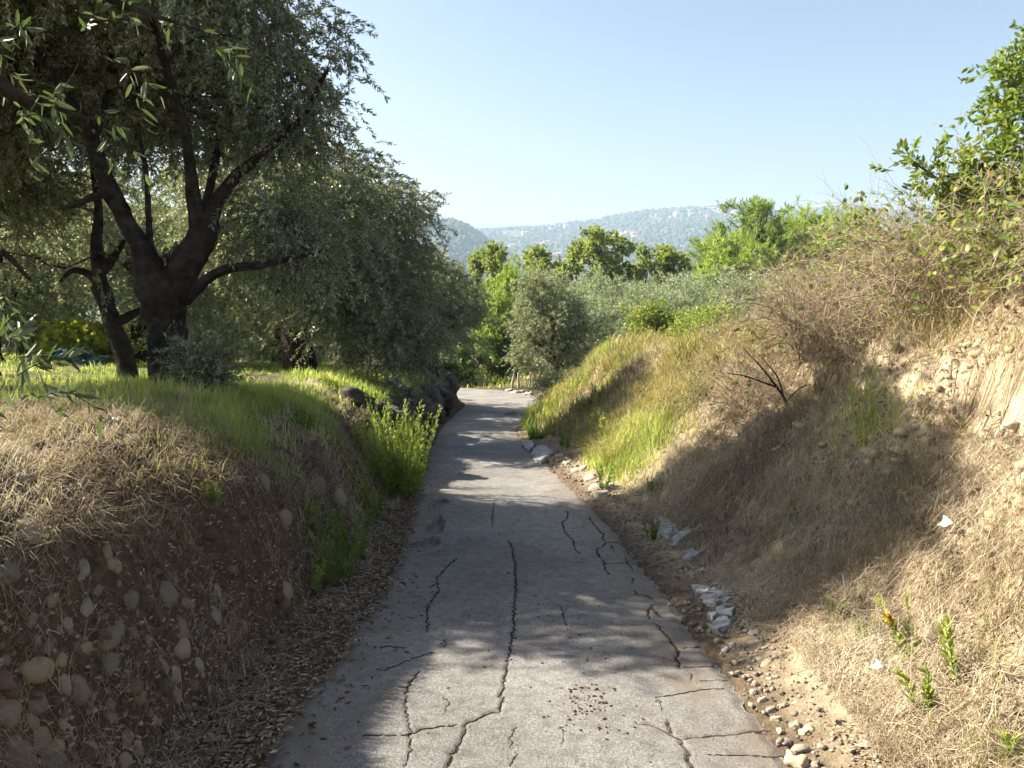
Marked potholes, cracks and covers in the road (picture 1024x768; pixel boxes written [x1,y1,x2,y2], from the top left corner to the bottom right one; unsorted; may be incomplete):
crack [362,542,518,768]
crack [589,518,784,768]
